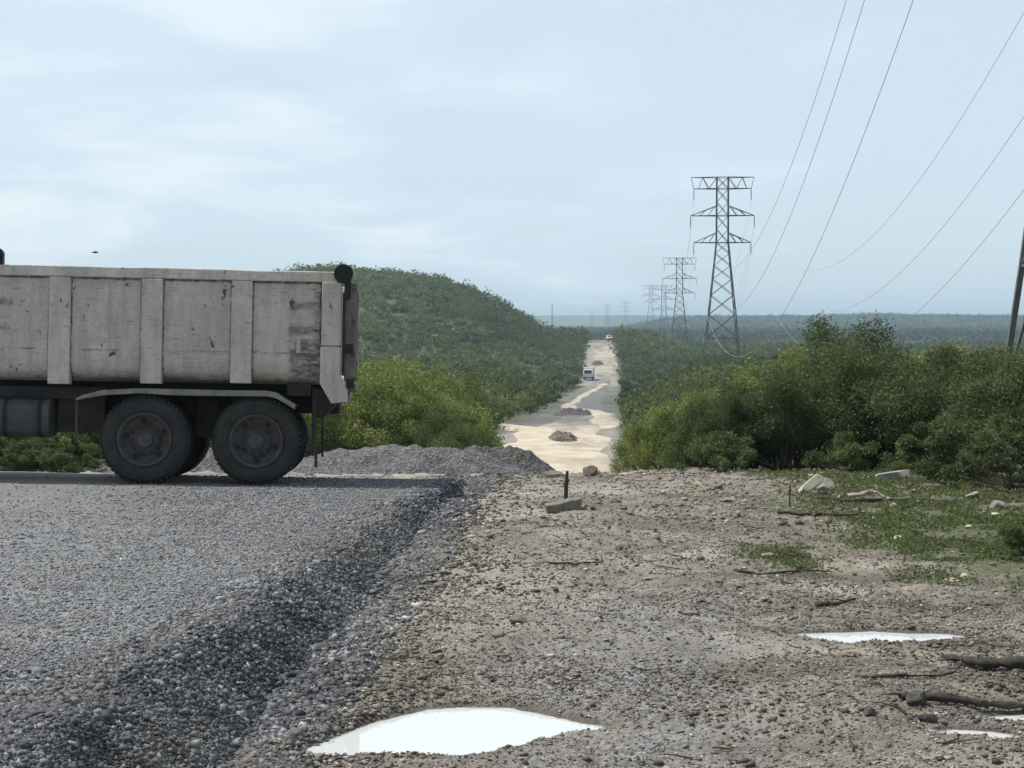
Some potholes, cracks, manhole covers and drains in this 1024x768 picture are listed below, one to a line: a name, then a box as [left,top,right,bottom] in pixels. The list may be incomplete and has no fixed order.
pothole [945,706,1024,725]
pothole [769,623,991,645]
pothole [292,697,631,761]
pothole [916,719,1024,741]
